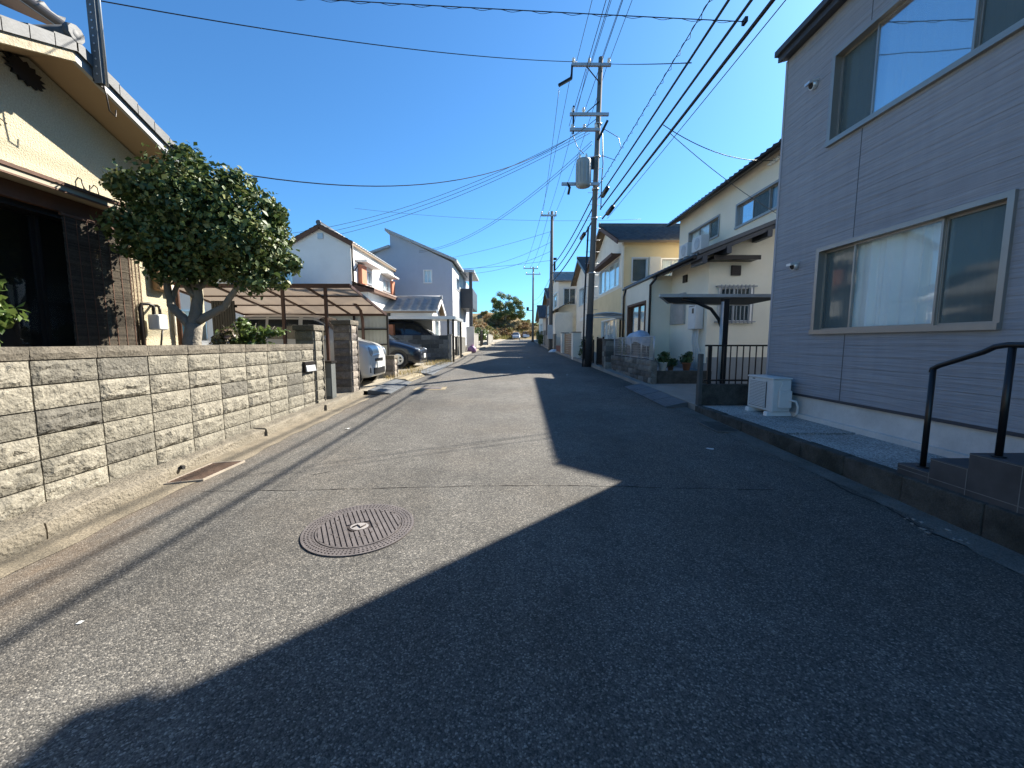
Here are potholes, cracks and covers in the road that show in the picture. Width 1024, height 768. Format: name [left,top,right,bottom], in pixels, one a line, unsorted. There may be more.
manhole cover [300,504,414,557]
